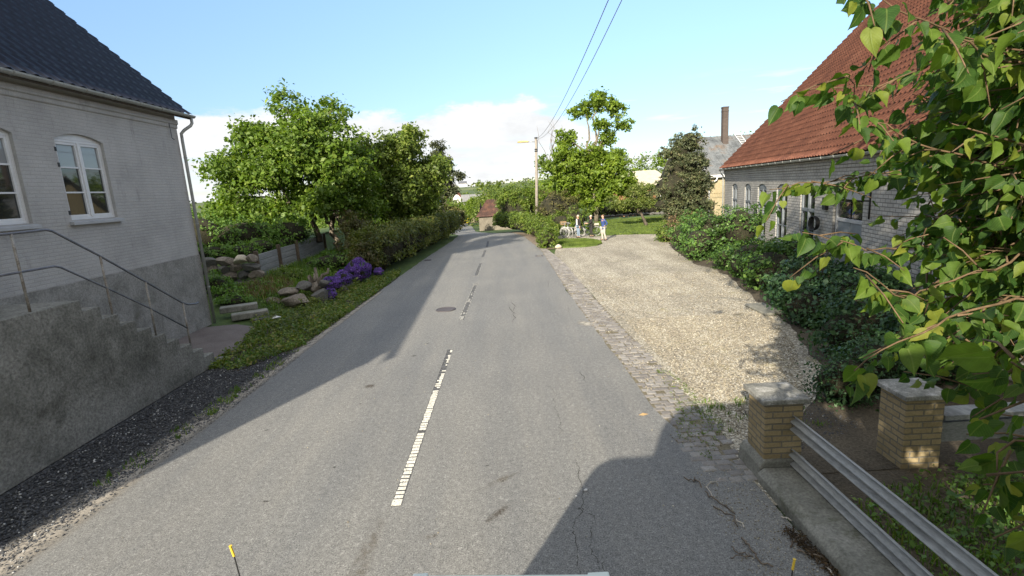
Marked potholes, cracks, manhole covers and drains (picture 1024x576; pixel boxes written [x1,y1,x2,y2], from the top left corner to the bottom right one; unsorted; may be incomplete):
crack [572,459,607,573]
